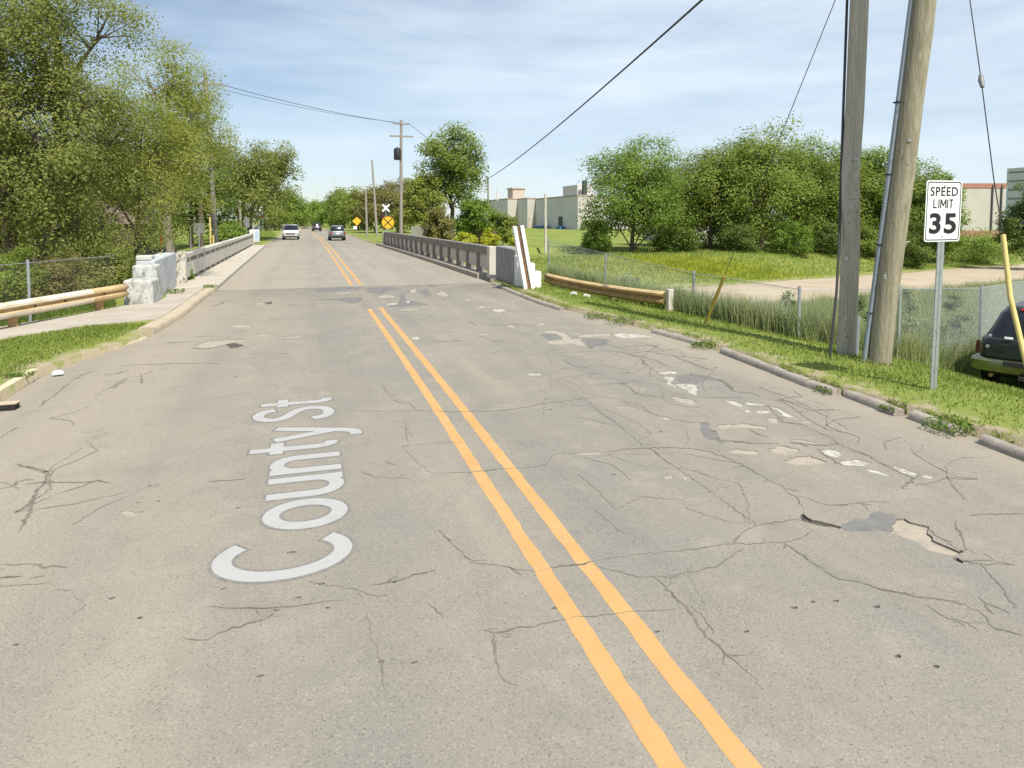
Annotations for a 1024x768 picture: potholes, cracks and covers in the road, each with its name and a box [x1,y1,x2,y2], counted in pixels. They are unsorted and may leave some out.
crack [183,569,436,640]
crack [341,342,1024,688]
crack [0,335,226,533]
pothole [888,518,961,555]
